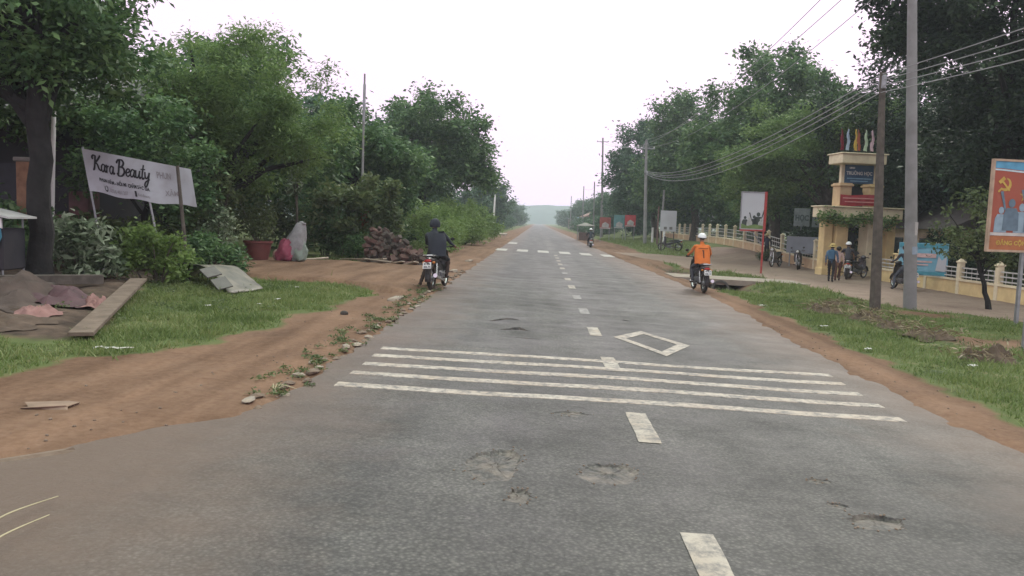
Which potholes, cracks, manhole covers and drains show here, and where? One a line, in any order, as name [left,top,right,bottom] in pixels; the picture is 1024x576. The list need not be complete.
pothole [842,512,907,532]
pothole [826,501,850,512]
pothole [805,477,832,485]
pothole [453,446,527,485]
pothole [576,462,644,486]
pothole [503,487,537,506]
